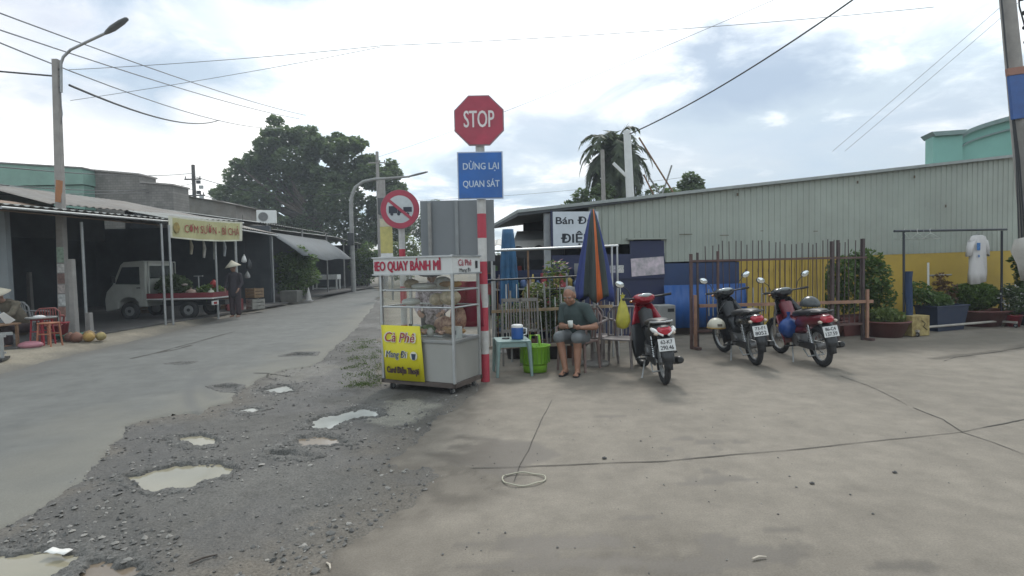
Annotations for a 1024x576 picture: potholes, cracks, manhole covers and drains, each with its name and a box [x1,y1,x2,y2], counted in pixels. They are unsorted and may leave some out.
pothole [258,445,327,463]
crack [473,400,1024,481]
pothole [227,404,272,416]
pothole [163,431,227,450]
crack [842,376,1023,454]
pothole [109,457,246,497]
pothole [0,539,101,576]
pothole [61,549,158,576]
pothole [256,383,304,395]
pothole [283,430,357,448]
pothole [295,405,388,433]
crack [130,331,235,359]
